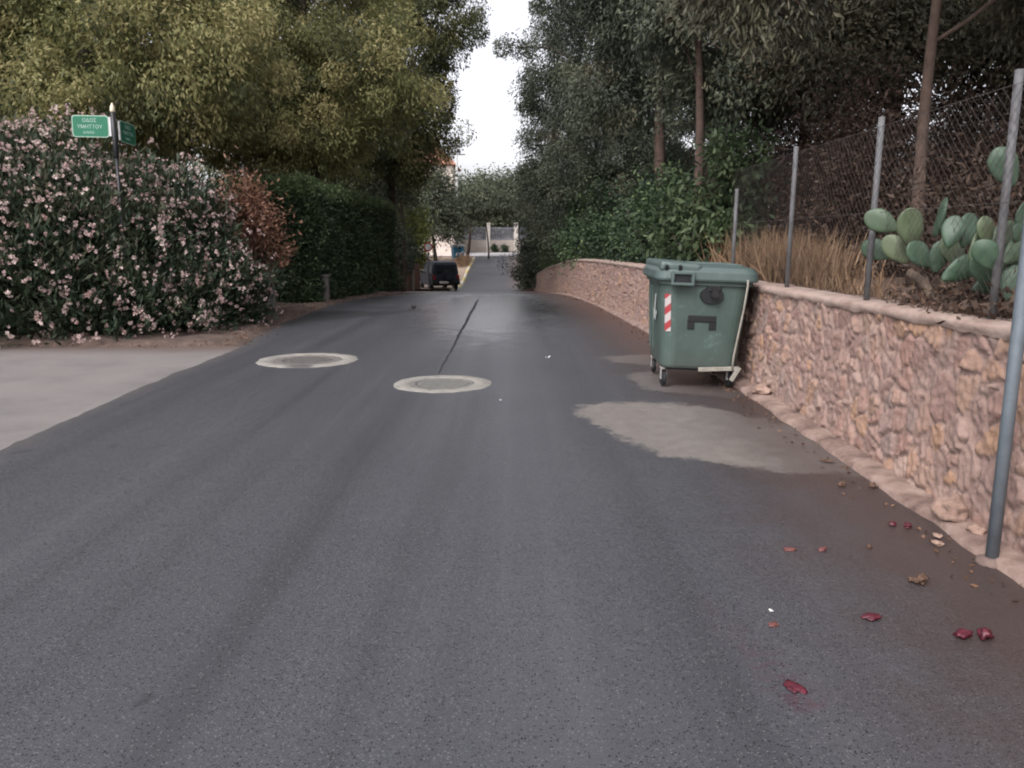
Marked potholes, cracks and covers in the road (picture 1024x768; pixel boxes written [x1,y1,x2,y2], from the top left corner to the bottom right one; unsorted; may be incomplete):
manhole cover [256,353,358,368]
manhole cover [394,375,491,393]
crack [438,300,479,373]
